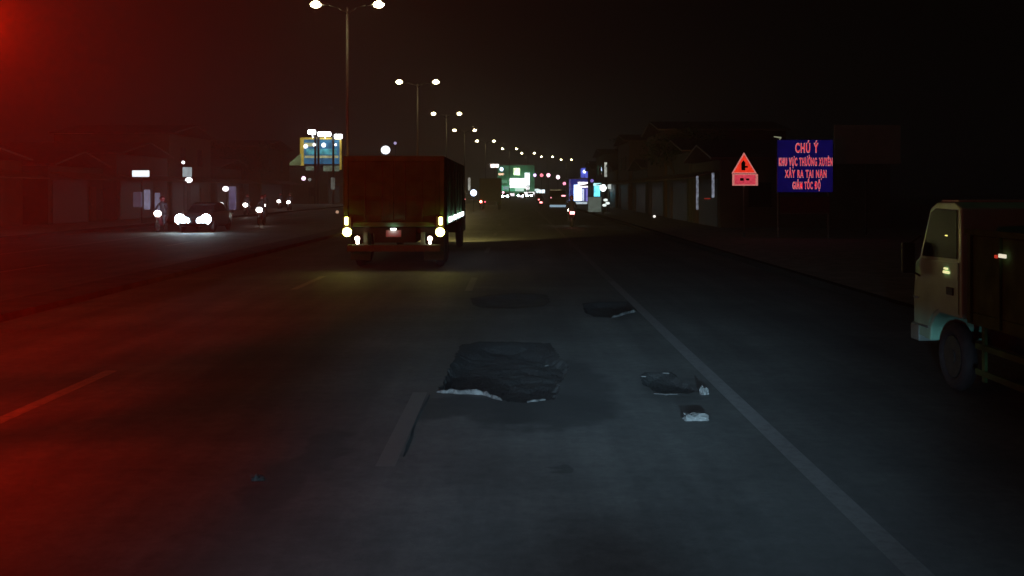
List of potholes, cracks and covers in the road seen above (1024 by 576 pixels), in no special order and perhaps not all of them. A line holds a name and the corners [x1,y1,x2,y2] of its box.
pothole [640,372,699,395]
pothole [583,301,637,318]
pothole [437,341,569,403]
